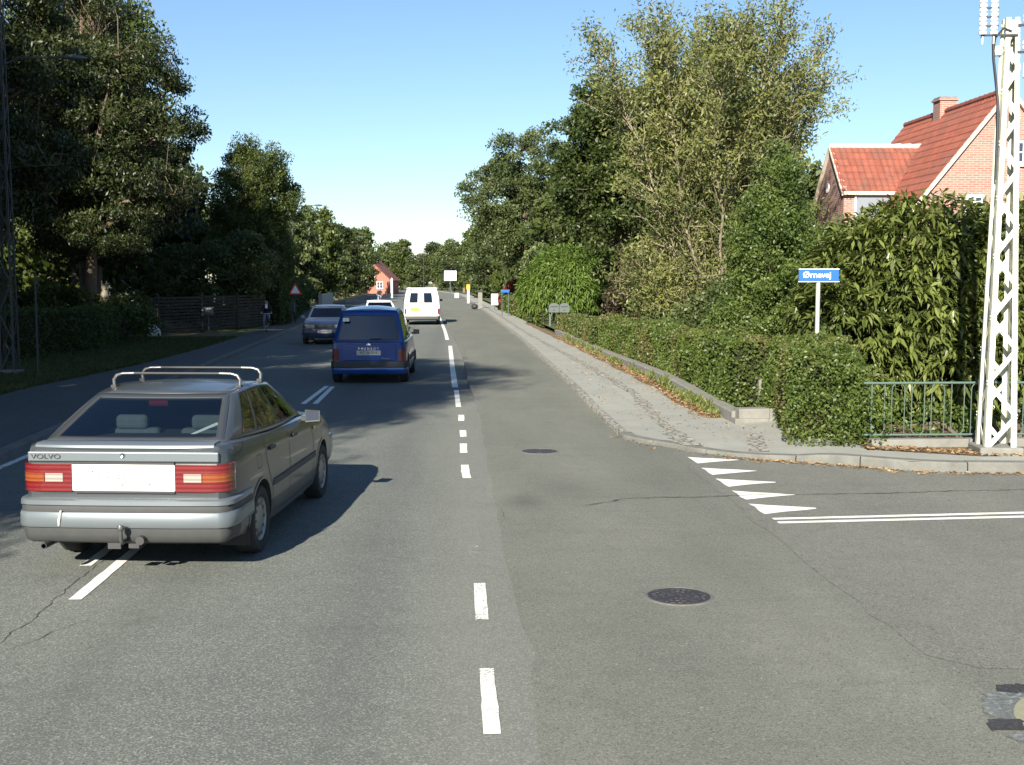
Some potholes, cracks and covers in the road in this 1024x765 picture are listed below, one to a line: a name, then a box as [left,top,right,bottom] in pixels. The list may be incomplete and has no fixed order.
crack [574,489,1010,507]
crack [0,550,115,648]
manhole cover [644,587,715,606]
